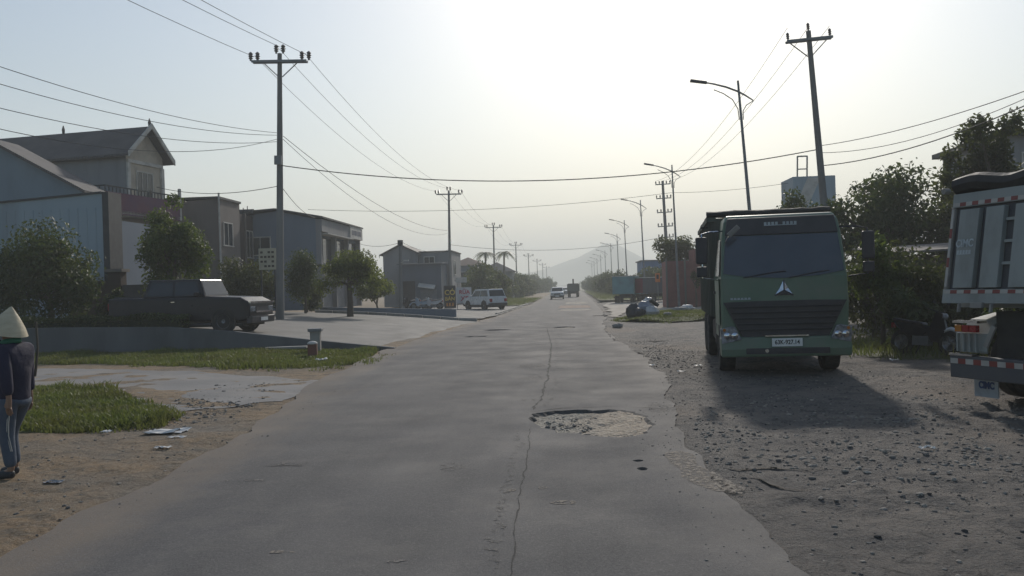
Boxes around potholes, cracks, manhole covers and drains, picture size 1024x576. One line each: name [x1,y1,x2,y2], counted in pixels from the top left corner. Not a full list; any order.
crack [725,465,839,496]
pothole [528,409,656,437]
